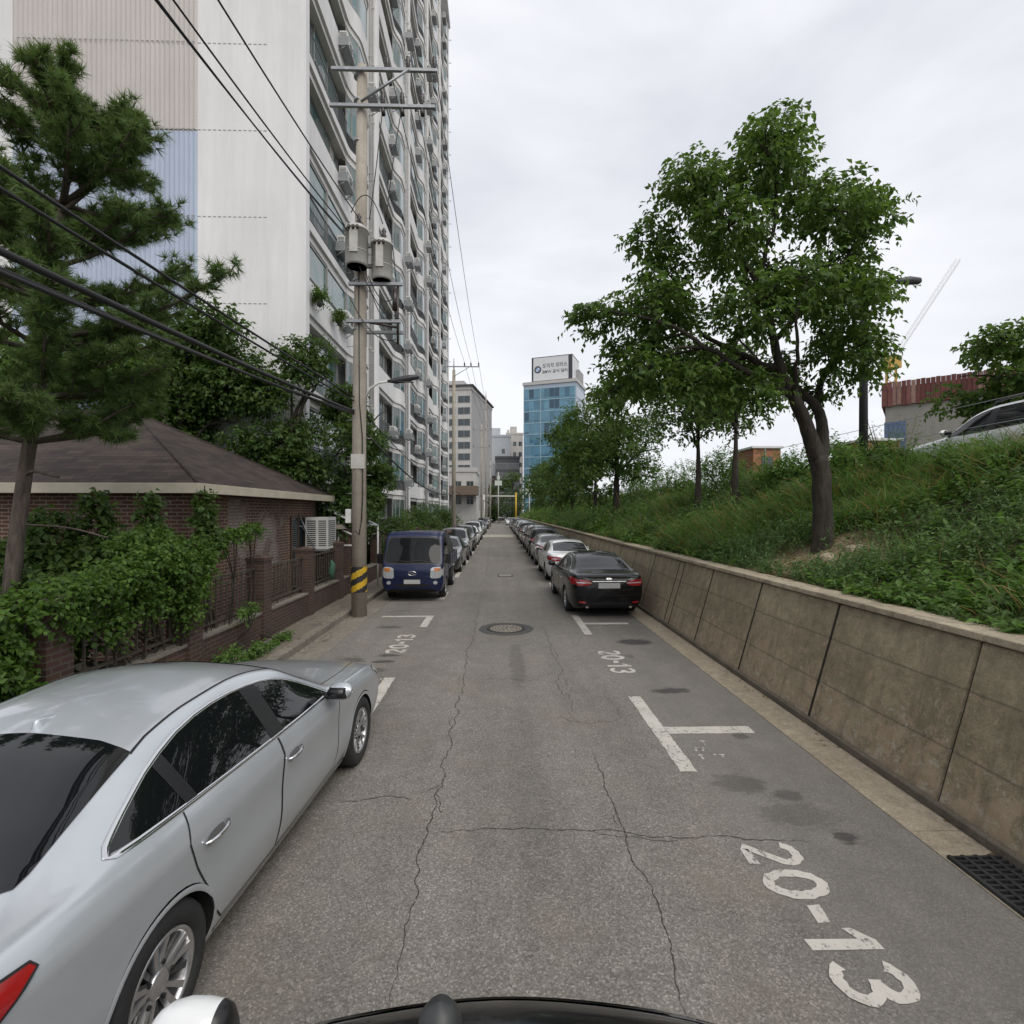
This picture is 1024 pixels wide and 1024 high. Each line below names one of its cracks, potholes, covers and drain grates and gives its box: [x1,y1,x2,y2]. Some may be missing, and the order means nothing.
crack [431,761,802,1015]
manhole cover [479,623,534,636]
crack [338,592,623,1007]
drain grate [947,854,1024,917]
